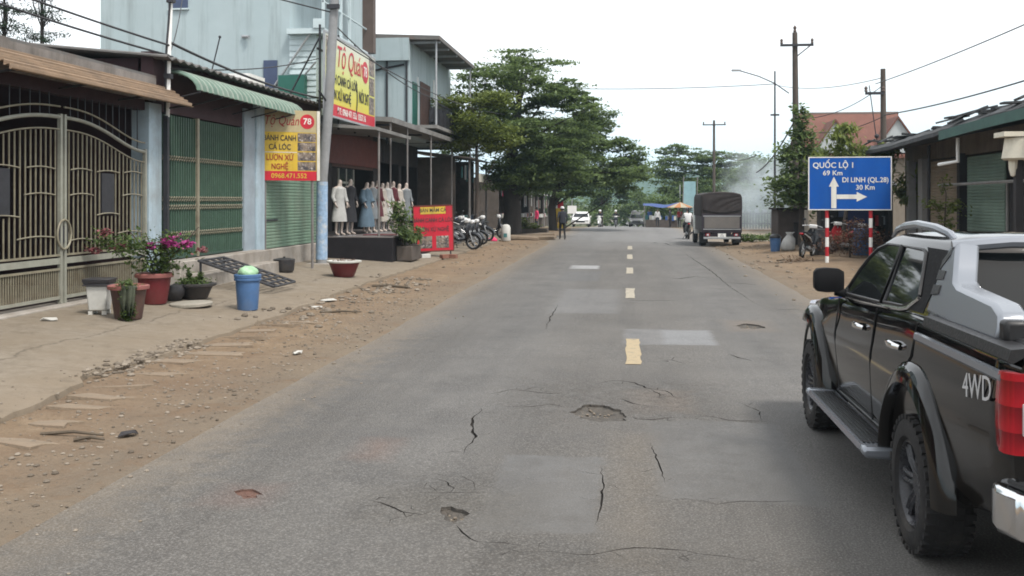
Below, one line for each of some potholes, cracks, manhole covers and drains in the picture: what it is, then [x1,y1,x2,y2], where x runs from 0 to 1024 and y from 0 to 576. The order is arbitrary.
crack [359,475,494,523]
crack [457,526,775,566]
crack [613,380,680,421]
pothole [440,506,470,523]
crack [464,387,569,452]
crack [640,445,781,507]
crack [581,468,618,526]
pothole [570,404,627,422]
